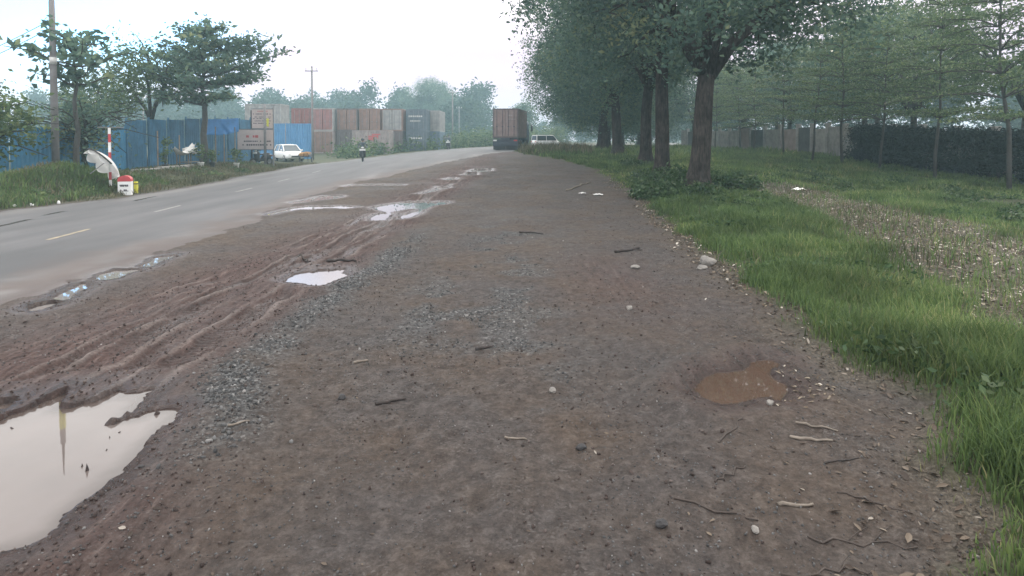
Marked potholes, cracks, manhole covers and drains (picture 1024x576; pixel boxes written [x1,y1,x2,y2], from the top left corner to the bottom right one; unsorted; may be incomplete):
pothole [684,354,796,406]
pothole [134,253,181,269]
pothole [19,300,67,312]
pothole [367,200,451,220]
pothole [89,267,145,281]
pothole [278,266,354,286]
pothole [43,281,97,304]
pothole [0,382,193,554]
